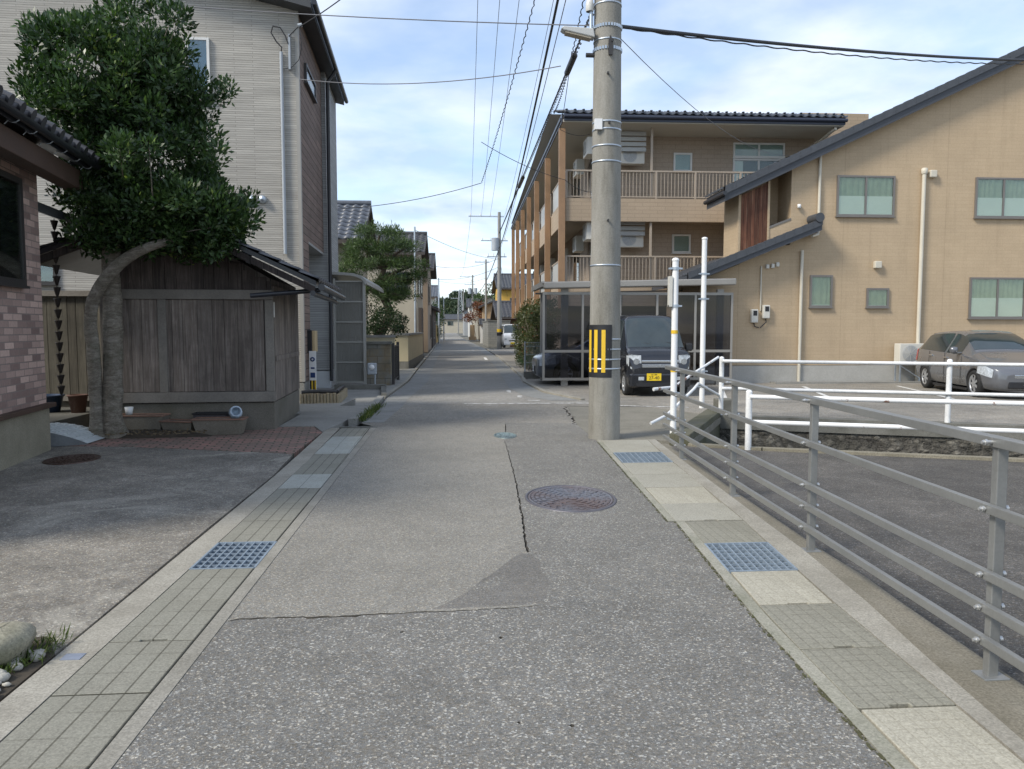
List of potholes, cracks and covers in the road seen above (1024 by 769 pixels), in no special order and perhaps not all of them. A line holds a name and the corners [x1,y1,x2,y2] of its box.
drain grate [189,541,277,570]
manhole cover [525,485,617,513]
manhole cover [42,454,101,465]
drain grate [613,452,673,463]
drain grate [704,542,798,574]
